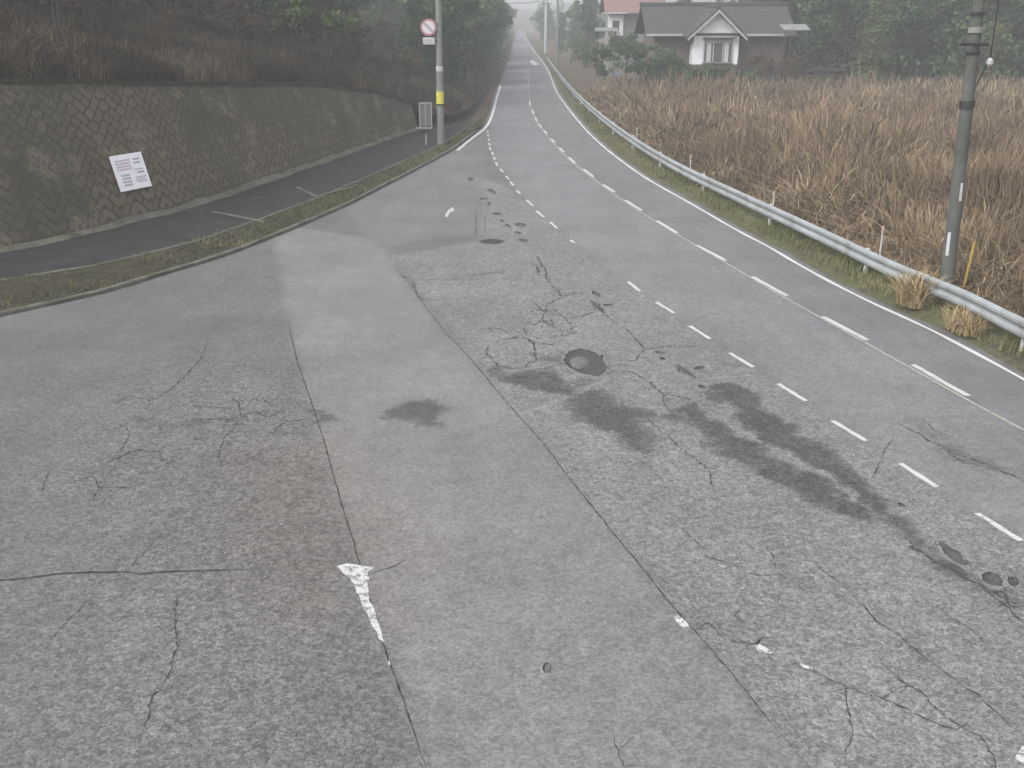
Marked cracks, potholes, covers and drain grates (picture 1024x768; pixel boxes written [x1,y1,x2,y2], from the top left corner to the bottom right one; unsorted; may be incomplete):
crack [192,399,312,465]
pothole [934,537,975,572]
pothole [539,655,555,680]
pothole [561,346,609,380]
crack [856,419,1019,480]
crack [121,342,209,408]
crack [34,423,177,500]
crack [677,529,811,595]
crack [613,731,663,768]
crack [482,256,728,489]
crack [908,540,1024,622]
